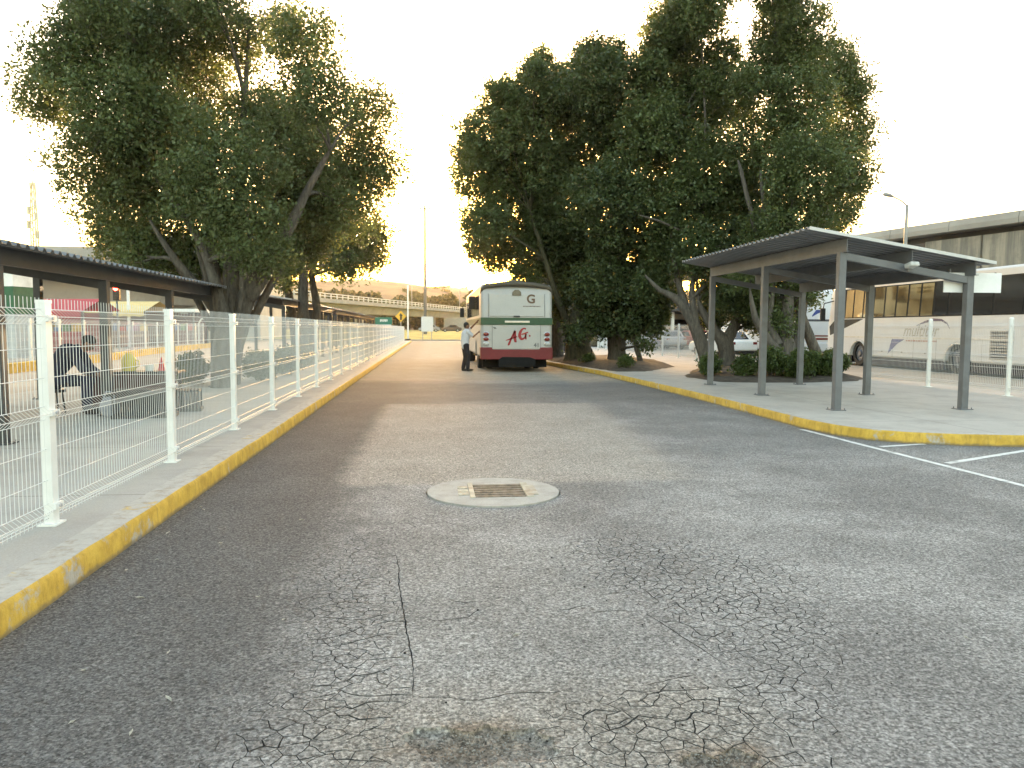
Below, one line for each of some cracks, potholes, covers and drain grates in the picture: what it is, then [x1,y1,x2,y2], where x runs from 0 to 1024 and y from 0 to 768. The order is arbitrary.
crack [198,513,576,768]
crack [528,533,851,768]
